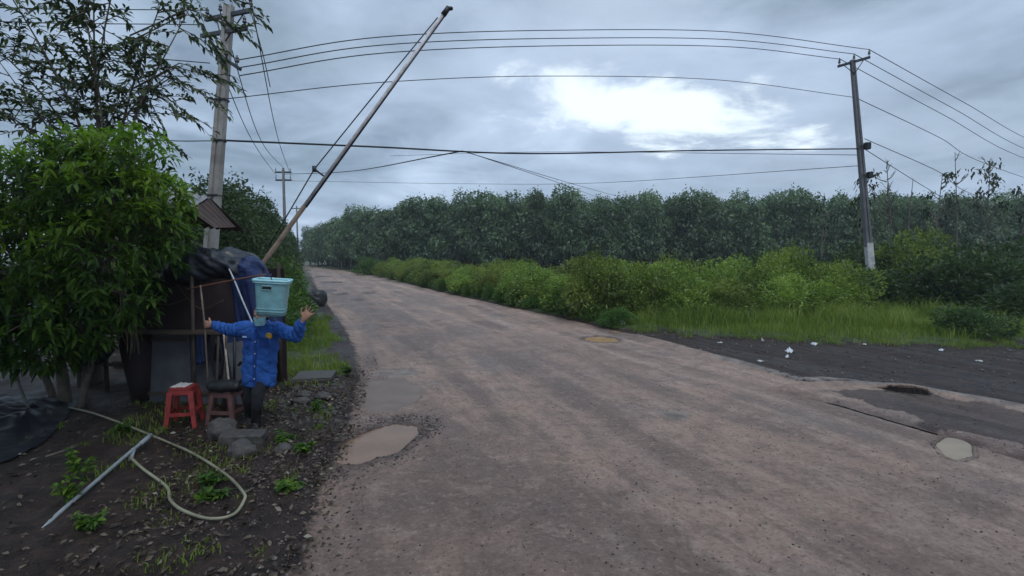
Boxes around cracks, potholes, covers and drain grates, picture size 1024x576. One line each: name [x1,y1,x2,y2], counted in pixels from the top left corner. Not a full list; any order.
pothole [932,436,978,462]
pothole [325,419,428,470]
crack [827,402,938,435]
pothole [872,383,938,396]
